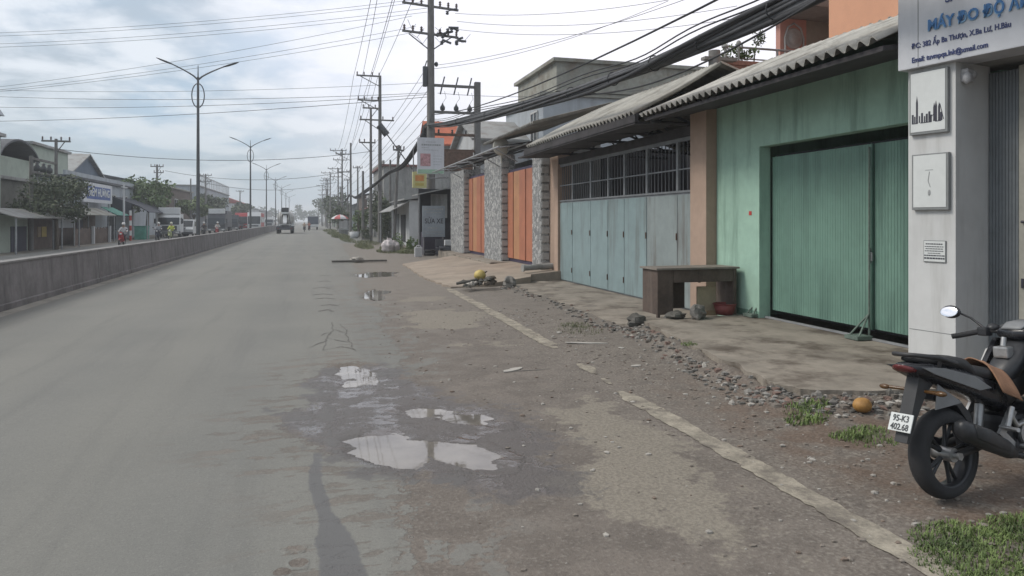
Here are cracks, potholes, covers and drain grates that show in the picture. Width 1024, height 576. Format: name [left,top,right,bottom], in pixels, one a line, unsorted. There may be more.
pothole [367,400,527,431]
pothole [320,423,527,478]
pothole [333,270,416,279]
pothole [303,360,420,392]
crack [311,275,356,351]
pothole [341,287,411,304]
